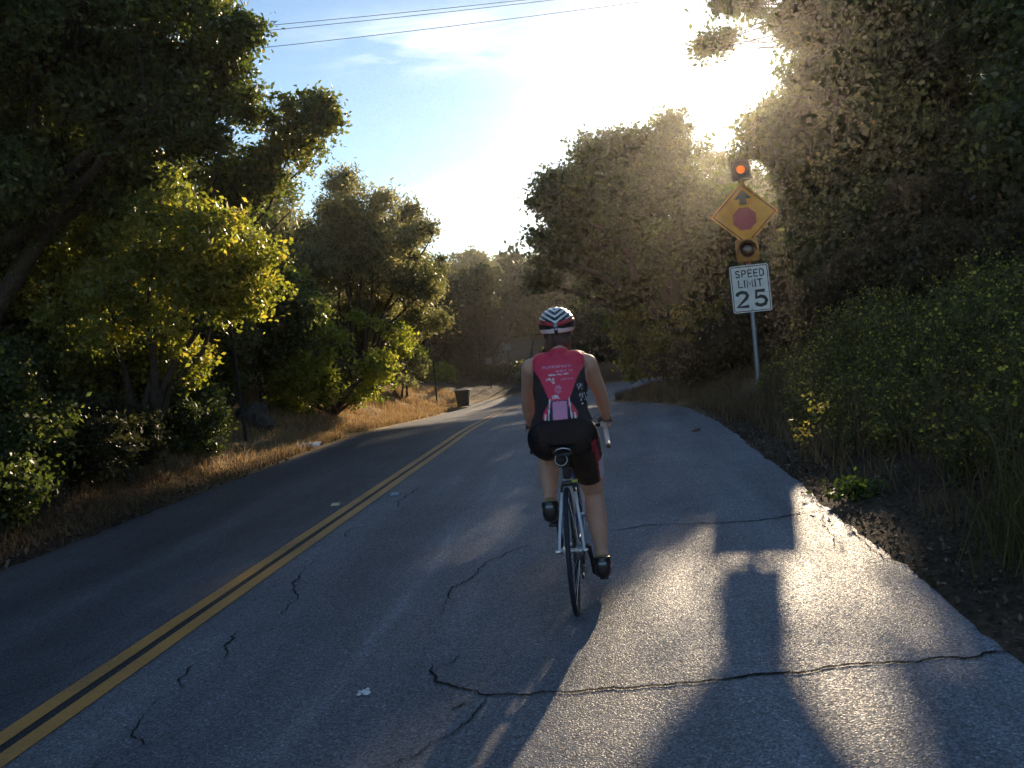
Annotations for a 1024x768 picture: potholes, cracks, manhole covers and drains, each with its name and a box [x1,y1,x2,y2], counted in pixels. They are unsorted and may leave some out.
crack [89,554,324,768]
crack [387,650,1010,768]
crack [613,510,898,564]
crack [441,543,532,613]
